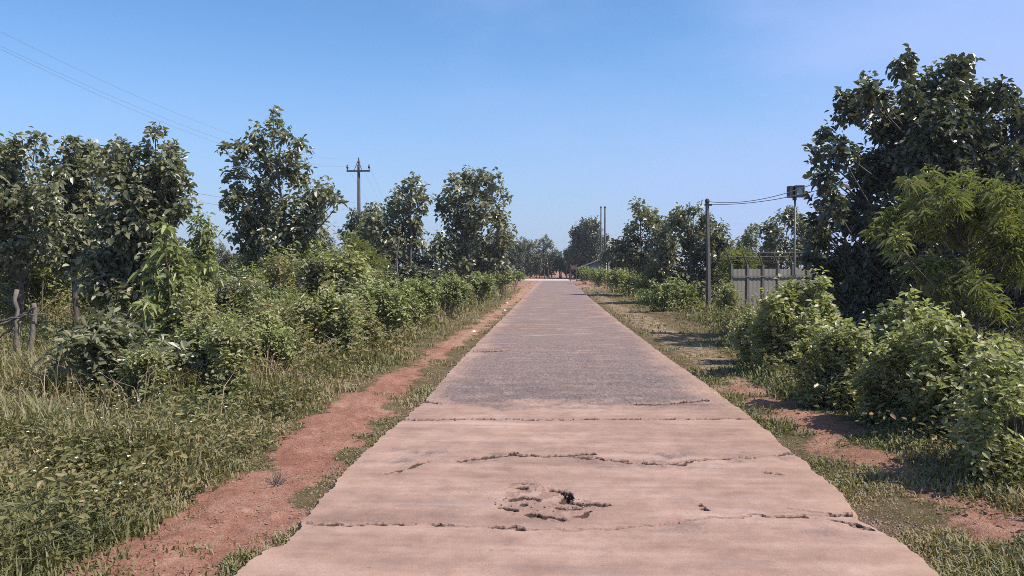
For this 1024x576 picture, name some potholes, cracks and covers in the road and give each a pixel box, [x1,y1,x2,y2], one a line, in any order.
crack [304,503,876,532]
crack [381,451,793,475]
pothole [497,482,613,523]
